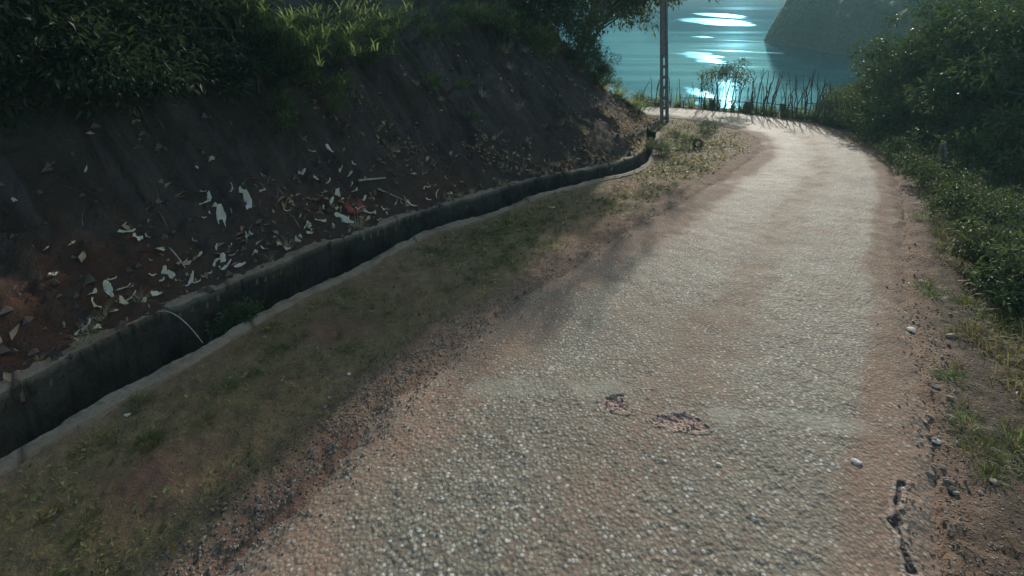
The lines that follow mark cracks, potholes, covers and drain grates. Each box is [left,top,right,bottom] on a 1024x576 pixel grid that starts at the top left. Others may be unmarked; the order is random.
pothole [596,391,634,415]
pothole [645,411,715,435]
crack [879,476,924,576]
